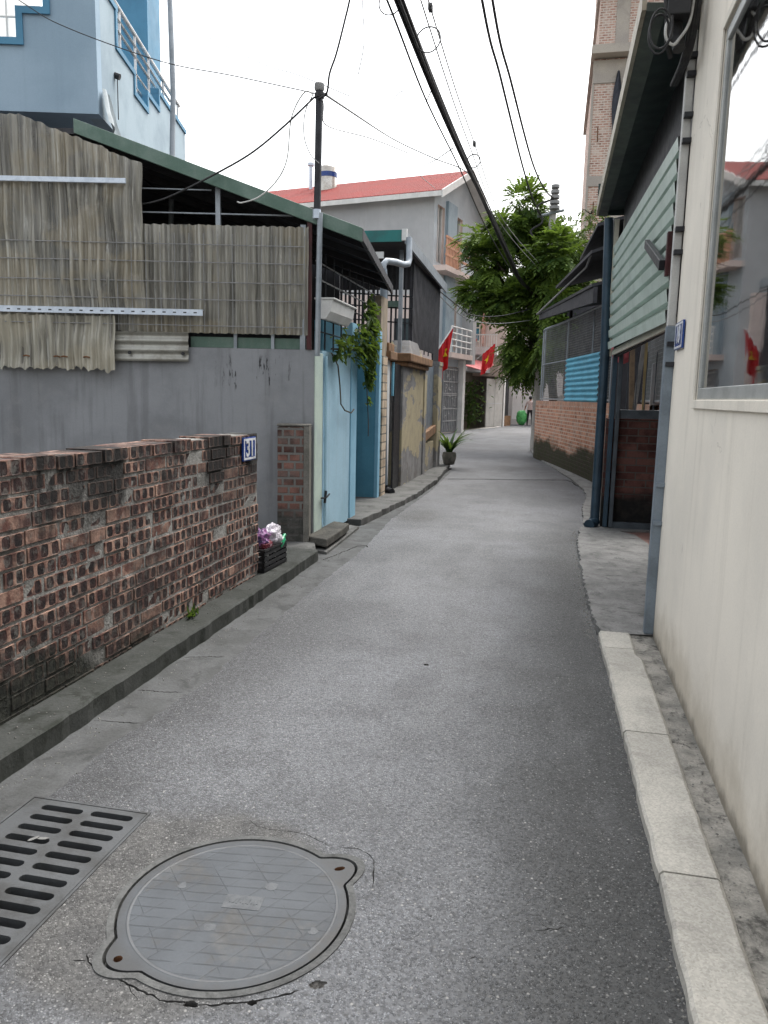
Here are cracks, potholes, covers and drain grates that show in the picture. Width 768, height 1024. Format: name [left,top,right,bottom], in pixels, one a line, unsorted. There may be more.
drain grate [0,795,151,968]
crack [248,819,375,888]
manhole cover [92,836,365,999]
crack [73,954,299,1008]
